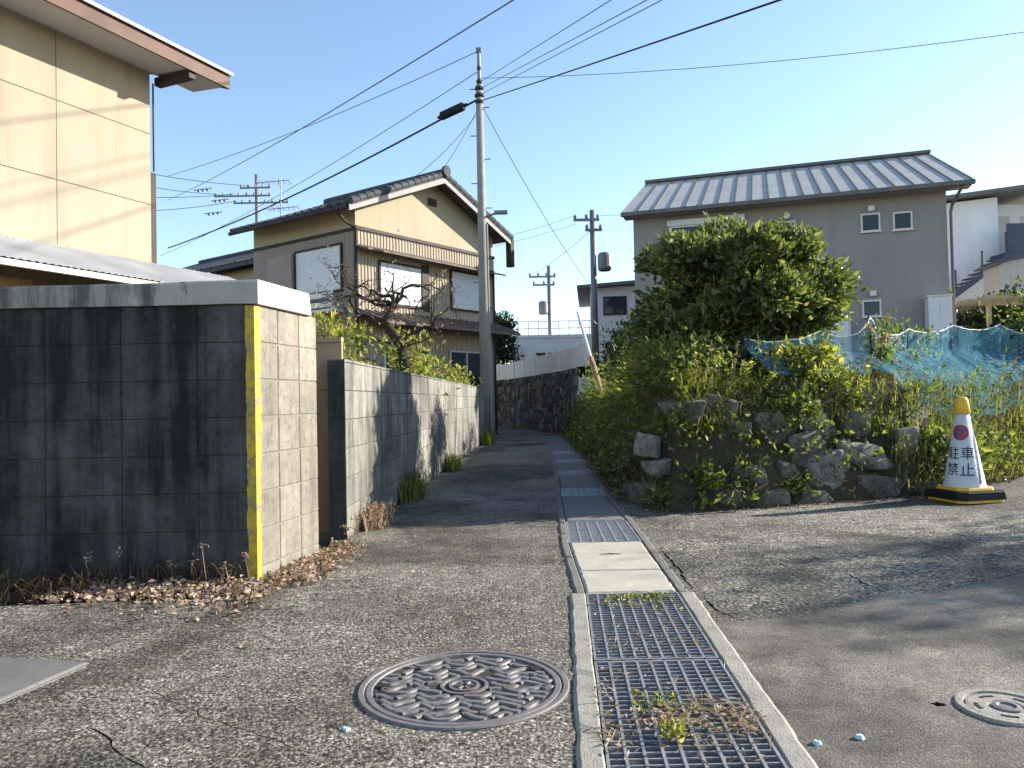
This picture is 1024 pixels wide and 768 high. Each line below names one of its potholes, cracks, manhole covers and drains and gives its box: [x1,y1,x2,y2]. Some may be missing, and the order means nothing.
manhole cover [953,689,1024,727]
manhole cover [357,650,570,731]
crack [662,550,743,621]
crack [135,683,338,760]
drain grate [565,520,642,547]
drain grate [561,487,605,497]
drain grate [586,592,719,671]
drain grate [594,659,789,768]
